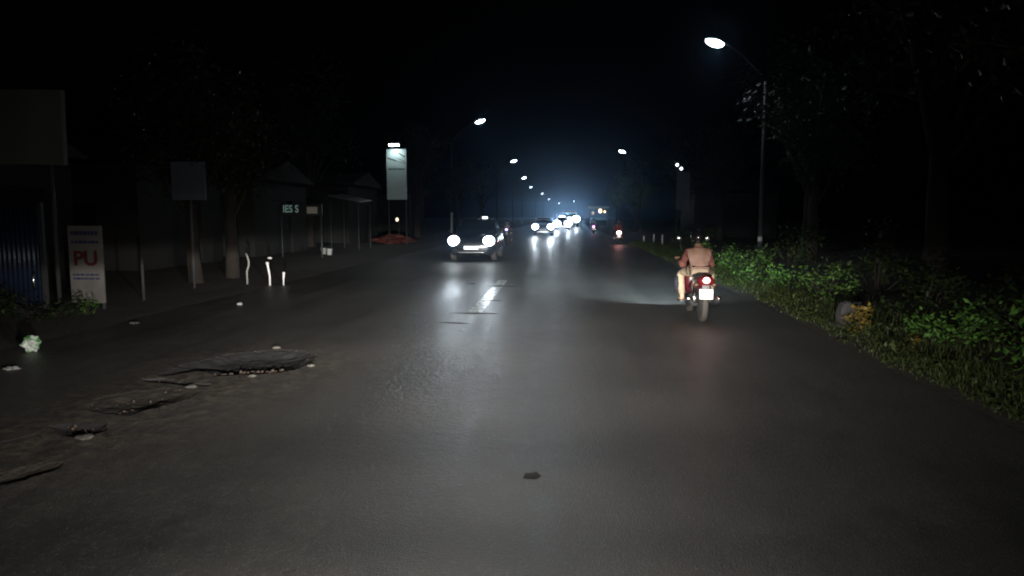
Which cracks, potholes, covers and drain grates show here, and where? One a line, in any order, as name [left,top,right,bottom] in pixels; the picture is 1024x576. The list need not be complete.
pothole [81,387,203,416]
pothole [153,349,318,377]
pothole [142,378,212,387]
pothole [0,461,67,485]
pothole [48,422,108,438]
